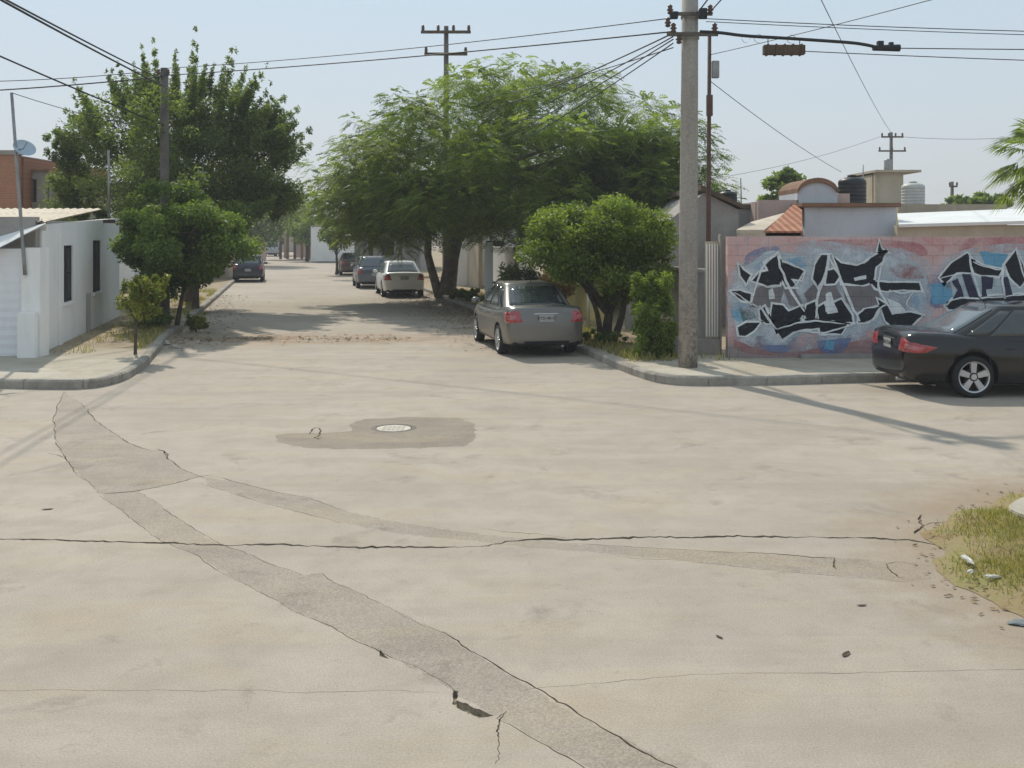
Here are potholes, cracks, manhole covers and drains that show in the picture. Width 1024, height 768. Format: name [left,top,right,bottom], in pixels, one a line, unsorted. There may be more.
manhole cover [371,424,417,432]
crack [0,393,943,768]
